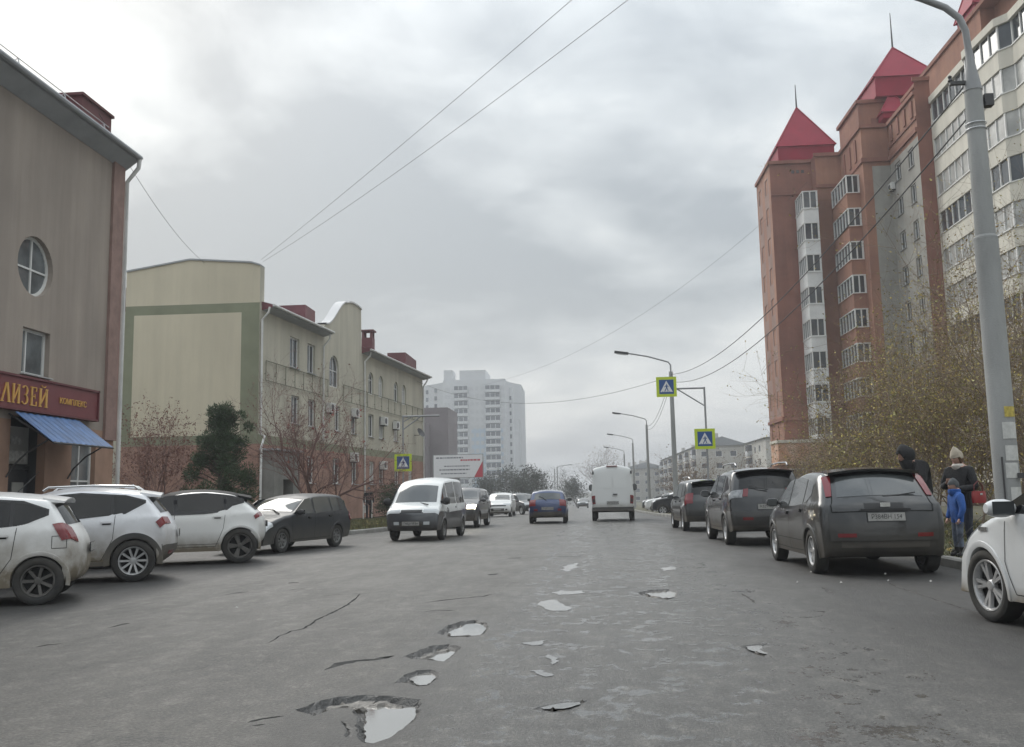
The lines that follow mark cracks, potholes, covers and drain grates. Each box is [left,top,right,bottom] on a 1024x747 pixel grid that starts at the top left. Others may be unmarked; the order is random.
pothole [534,699,587,713]
crack [325,656,393,670]
crack [425,595,488,612]
pothole [638,589,678,600]
crack [248,716,282,726]
pothole [437,620,490,637]
pothole [405,644,462,661]
pothole [395,669,440,686]
pothole [740,643,776,658]
pothole [296,695,422,743]
crack [266,593,366,644]
